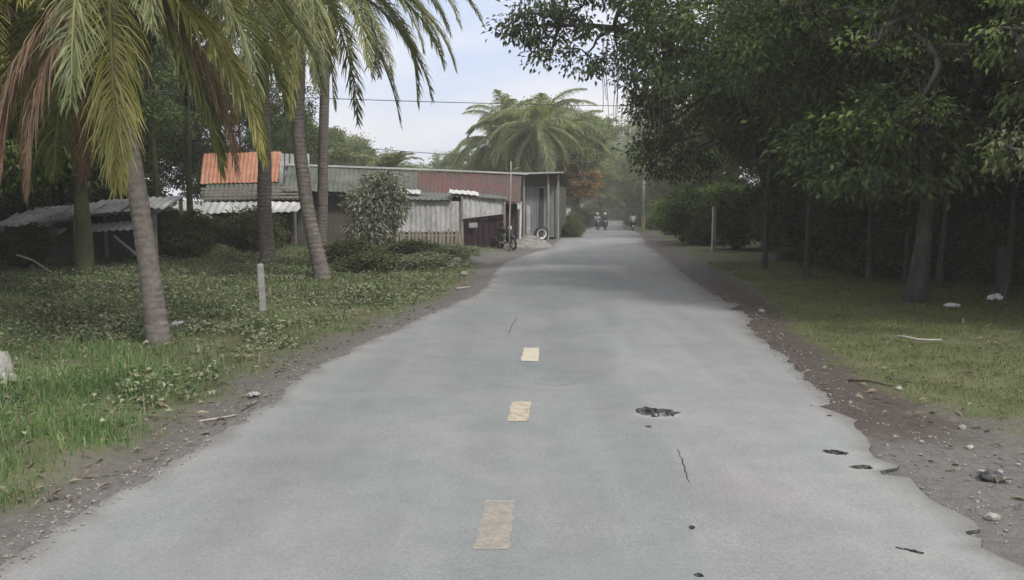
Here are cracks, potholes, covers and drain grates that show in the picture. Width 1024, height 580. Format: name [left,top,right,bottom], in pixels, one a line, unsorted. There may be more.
pothole [635,406,681,417]
